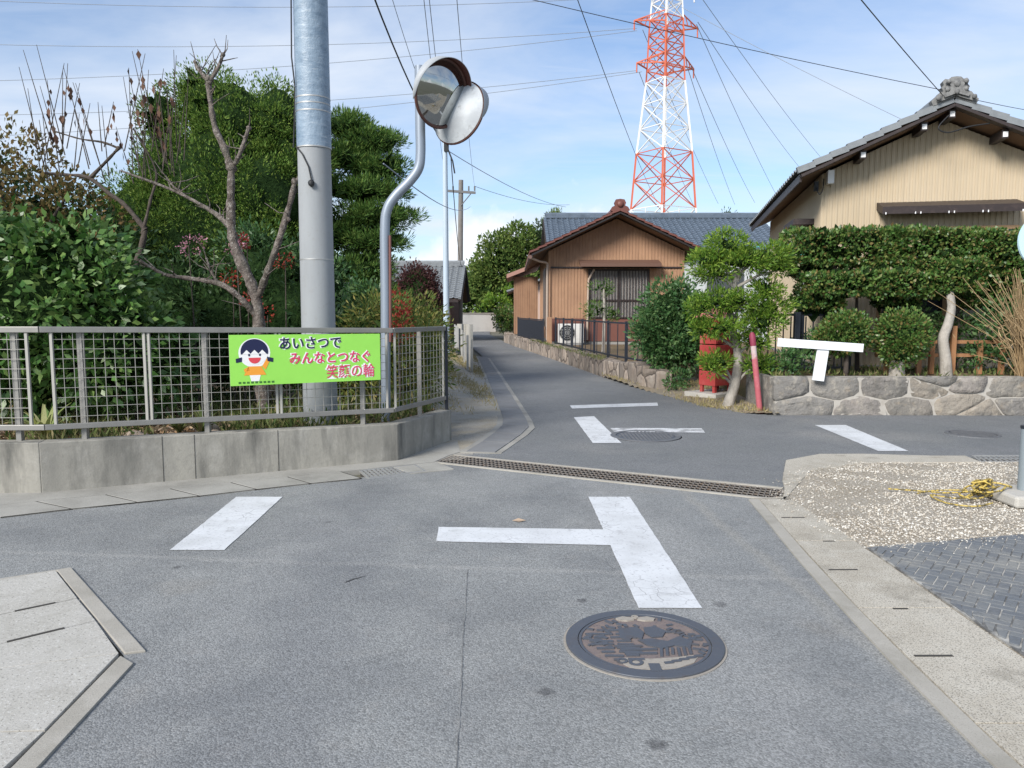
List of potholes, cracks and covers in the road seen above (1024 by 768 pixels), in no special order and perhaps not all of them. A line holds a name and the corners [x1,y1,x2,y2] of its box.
manhole cover [943,429,1003,439]
drain grate [436,454,784,498]
drain grate [359,464,426,479]
manhole cover [610,430,682,442]
manhole cover [563,610,728,682]
